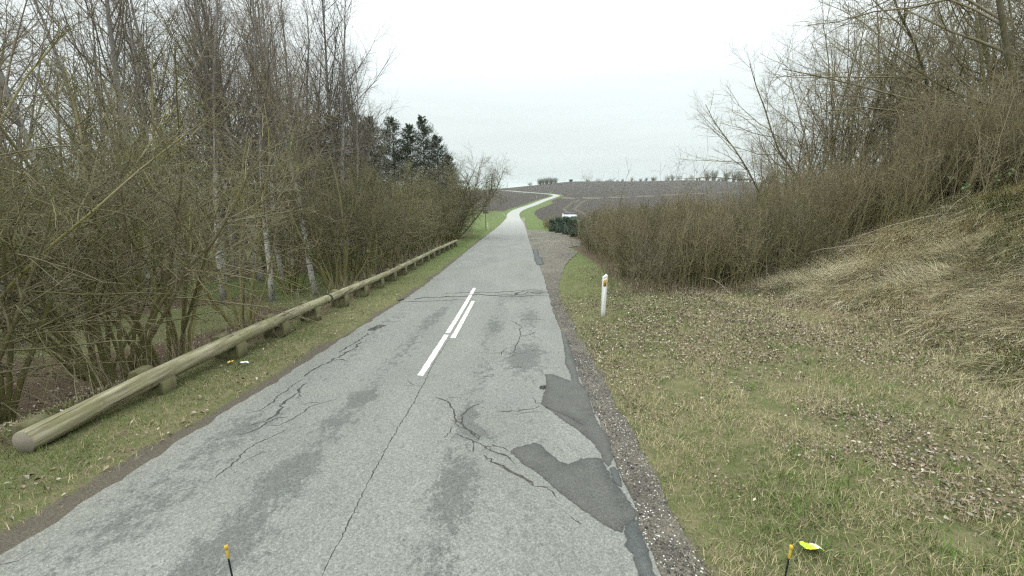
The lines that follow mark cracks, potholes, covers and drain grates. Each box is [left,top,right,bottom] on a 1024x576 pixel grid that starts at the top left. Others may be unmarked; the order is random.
crack [500,398,584,426]
crack [212,333,369,478]
crack [501,321,535,368]
crack [436,397,556,497]
